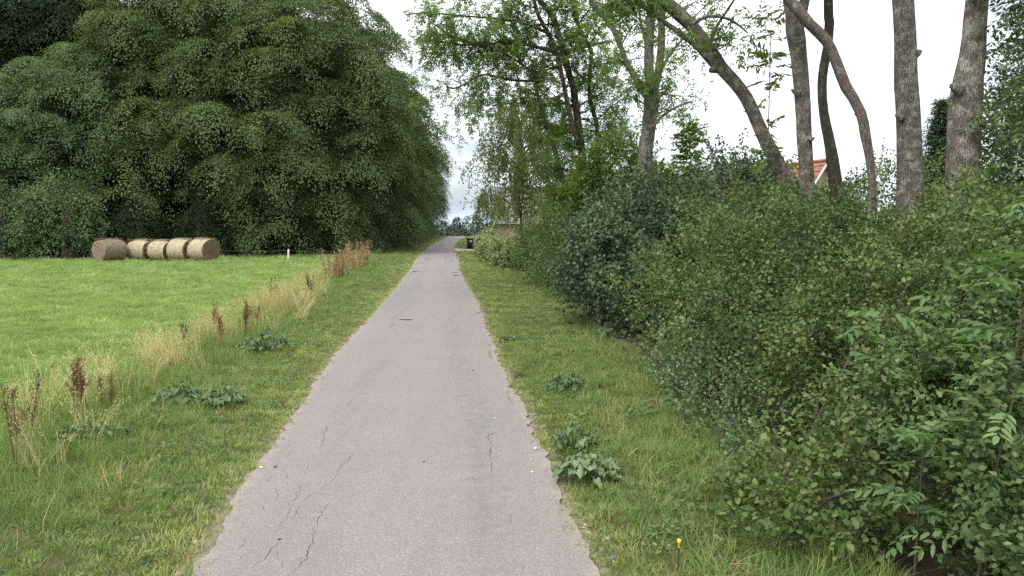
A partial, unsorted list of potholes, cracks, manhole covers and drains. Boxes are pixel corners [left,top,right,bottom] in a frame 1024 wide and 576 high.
crack [239,454,353,575]
